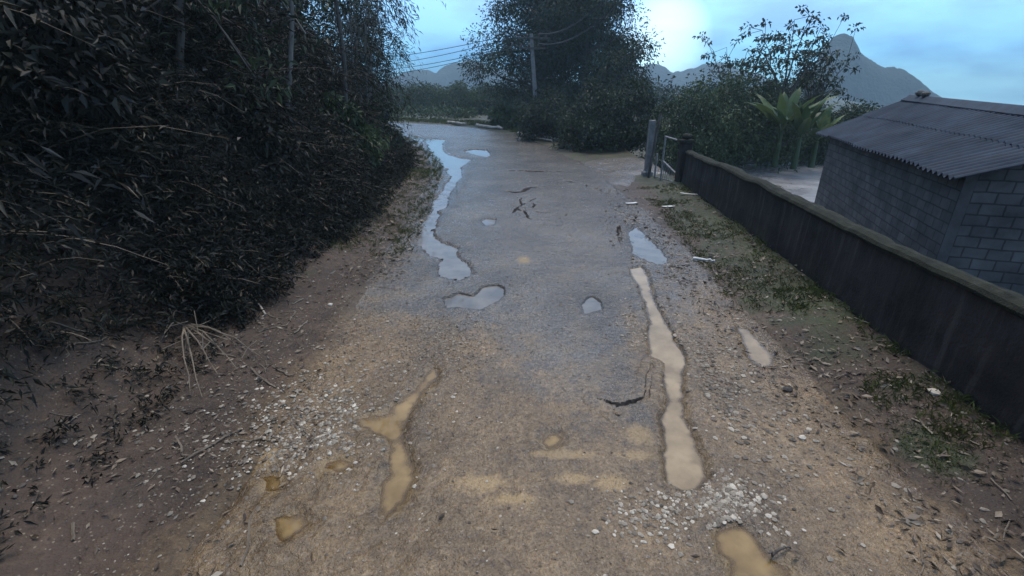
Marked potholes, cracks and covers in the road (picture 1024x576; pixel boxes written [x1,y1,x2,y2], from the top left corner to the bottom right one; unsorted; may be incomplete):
pothole [571,291,614,318]
pothole [459,148,495,157]
pothole [721,319,794,374]
pothole [242,490,345,568]
pothole [618,262,734,509]
pothole [475,217,502,228]
pothole [405,133,481,282]
pothole [432,280,514,315]
pothole [618,225,677,268]
pothole [333,358,458,543]
